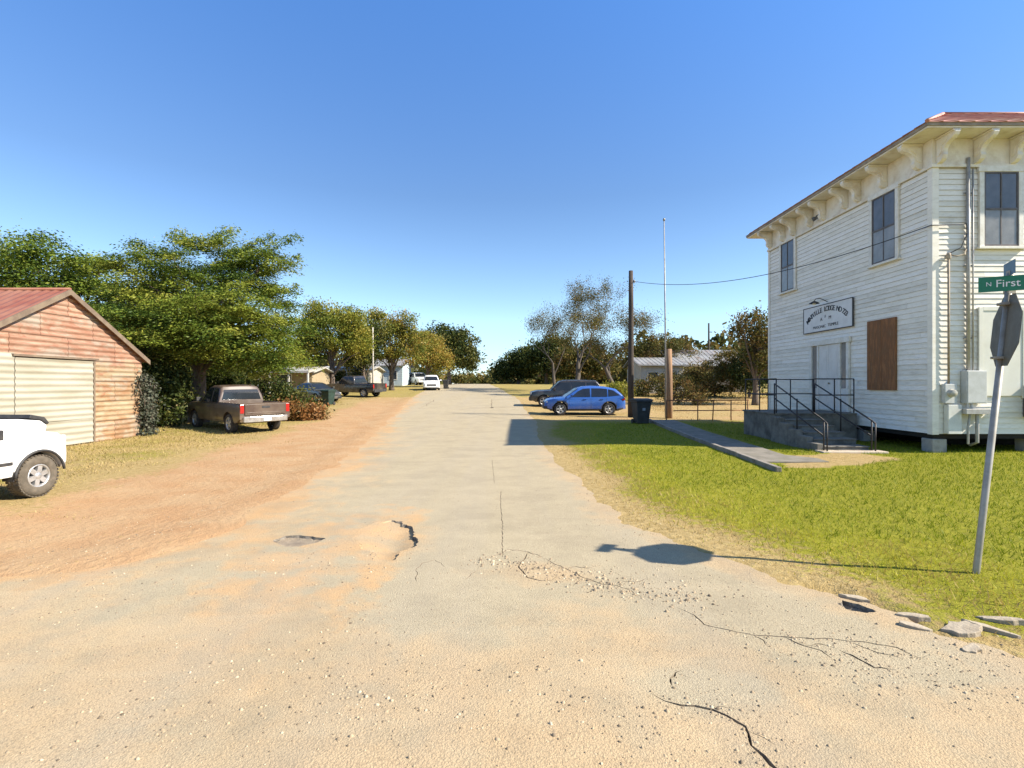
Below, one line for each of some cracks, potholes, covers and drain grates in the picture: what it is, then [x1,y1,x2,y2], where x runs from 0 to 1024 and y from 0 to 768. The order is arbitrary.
crack [490,465,647,597]
pothole [838,600,876,613]
crack [654,670,777,768]
pothole [273,535,325,547]
pothole [353,520,418,564]
crack [679,608,924,670]
